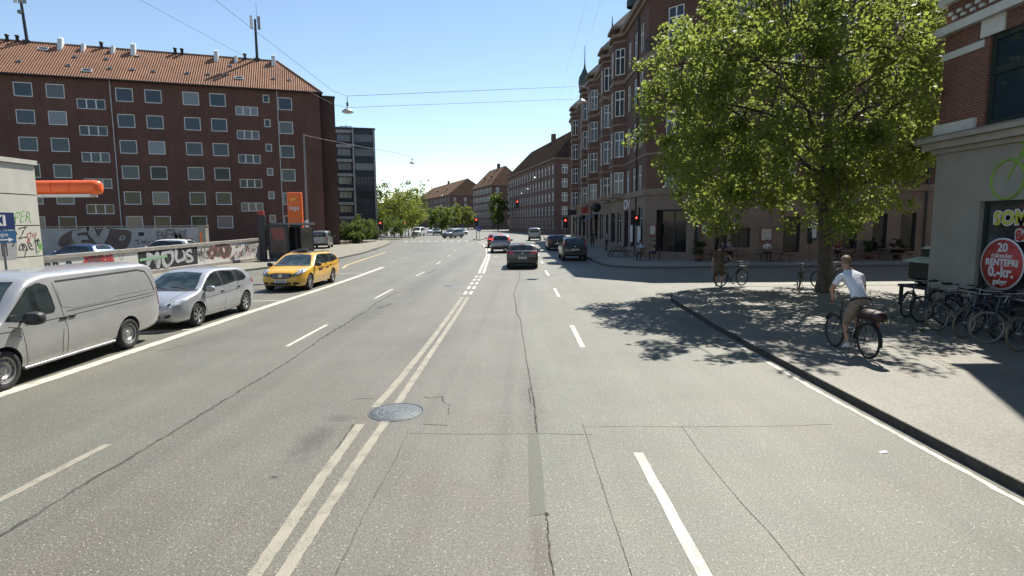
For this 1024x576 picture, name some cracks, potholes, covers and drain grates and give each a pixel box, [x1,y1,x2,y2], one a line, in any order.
crack [544,512,555,576]
manhole cover [368,403,424,421]
